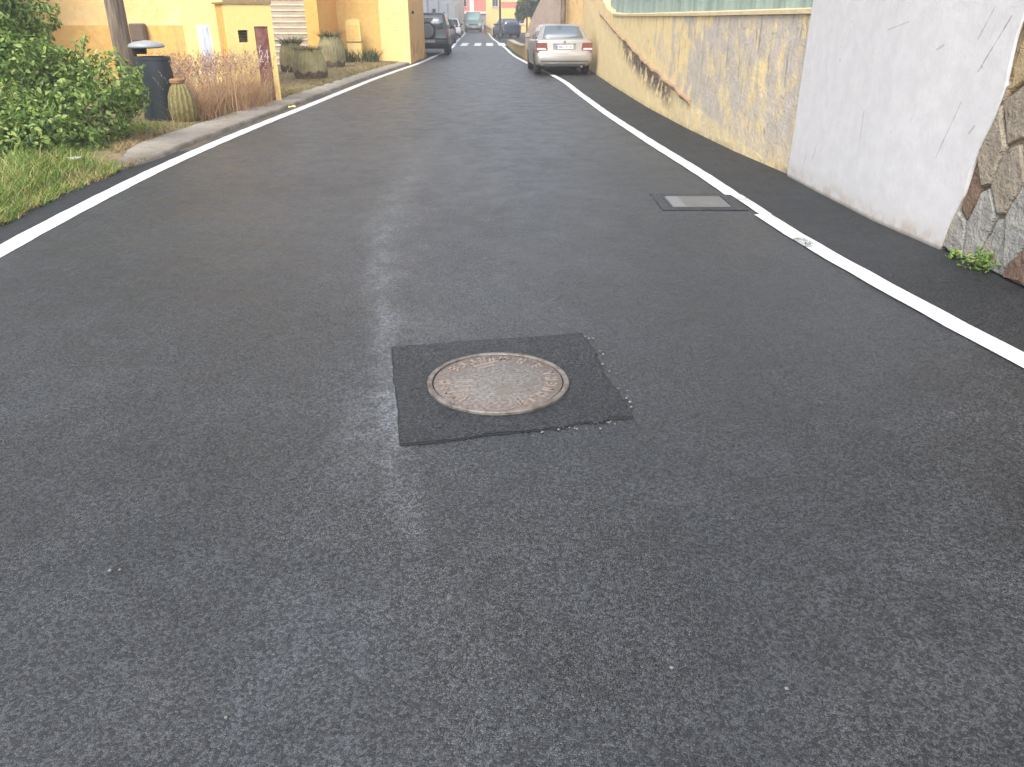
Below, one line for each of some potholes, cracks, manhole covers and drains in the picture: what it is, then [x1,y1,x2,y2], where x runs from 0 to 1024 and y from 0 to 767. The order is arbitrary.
manhole cover [662,195,735,208]
manhole cover [427,352,569,415]
